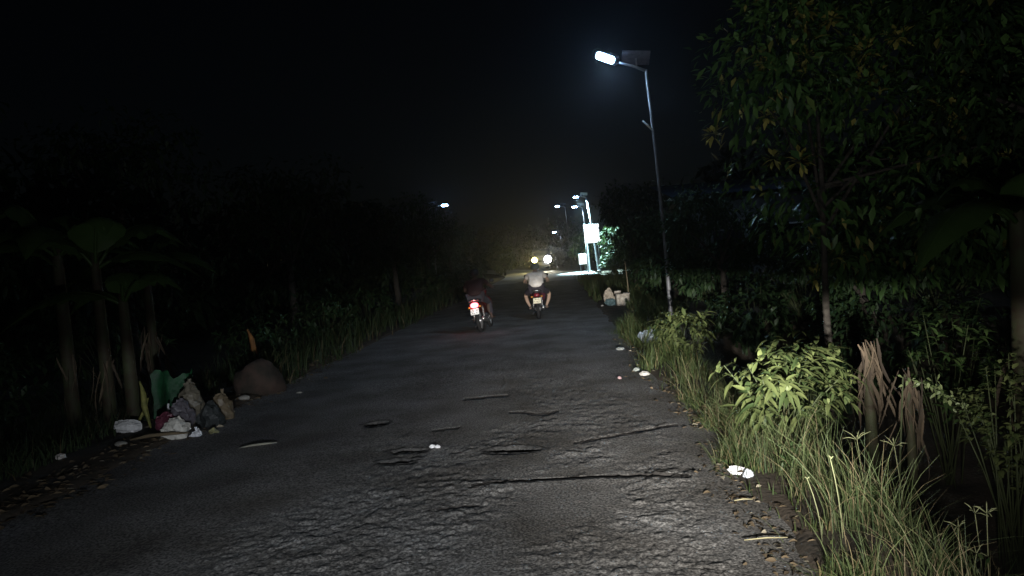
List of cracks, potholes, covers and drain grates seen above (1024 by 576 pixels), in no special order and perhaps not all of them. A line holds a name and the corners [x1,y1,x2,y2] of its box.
pothole [481,445,550,455]
crack [436,468,694,511]
pothole [370,457,424,466]
crack [574,422,675,444]
pothole [382,447,435,455]
